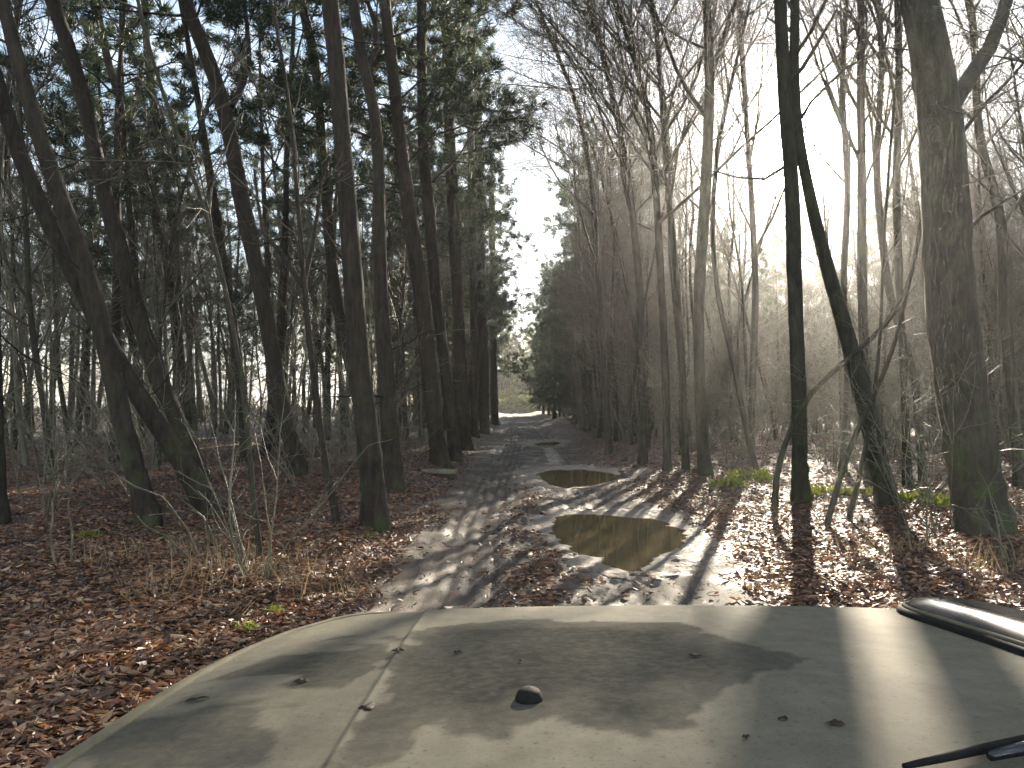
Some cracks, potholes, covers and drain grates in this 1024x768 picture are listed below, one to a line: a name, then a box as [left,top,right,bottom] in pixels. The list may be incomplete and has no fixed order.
pothole [499,464,641,490]
pothole [507,507,739,582]
